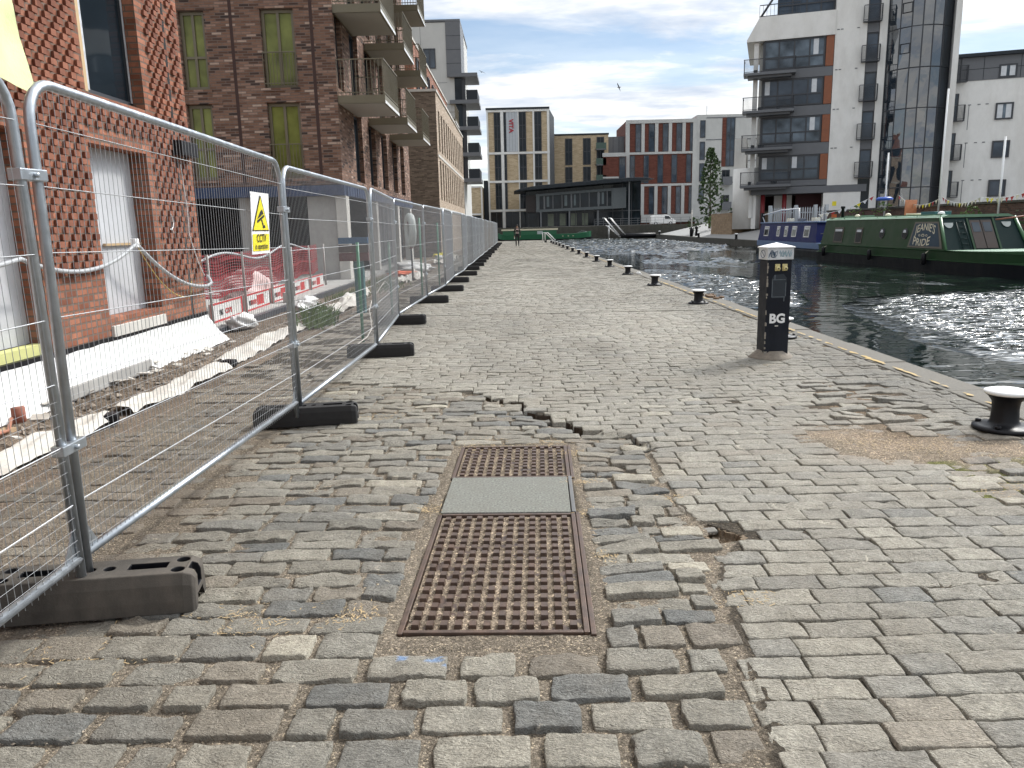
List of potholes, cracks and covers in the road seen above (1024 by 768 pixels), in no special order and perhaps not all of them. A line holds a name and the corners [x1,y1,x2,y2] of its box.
pothole [703,526,747,544]
crack [486,397,650,447]
